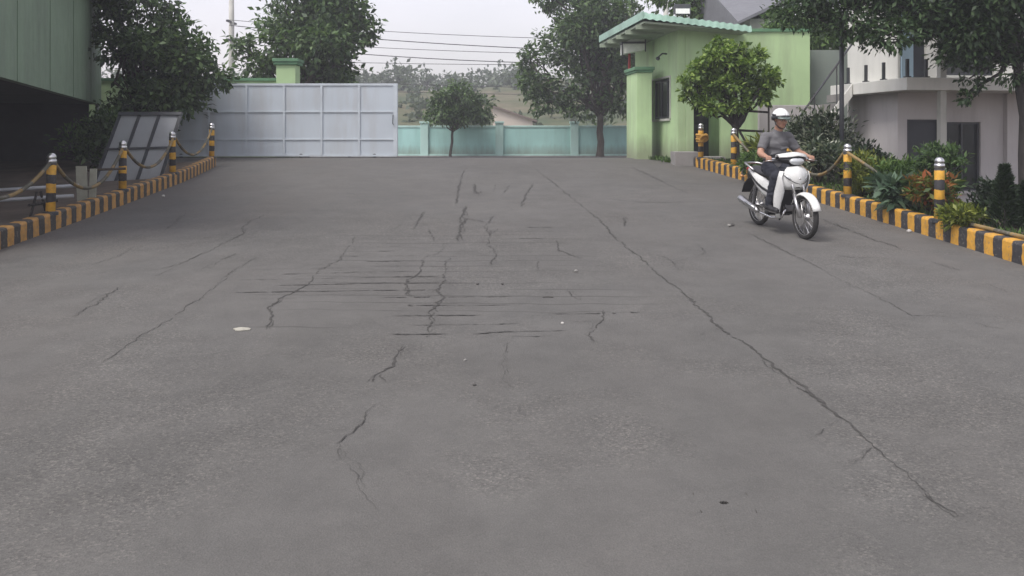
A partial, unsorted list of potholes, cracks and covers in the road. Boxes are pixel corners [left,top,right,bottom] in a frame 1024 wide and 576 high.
crack [265,236,355,329]
crack [397,170,550,337]
crack [537,170,956,520]
crack [336,347,402,506]
crack [756,236,997,328]
crack [72,212,269,359]
